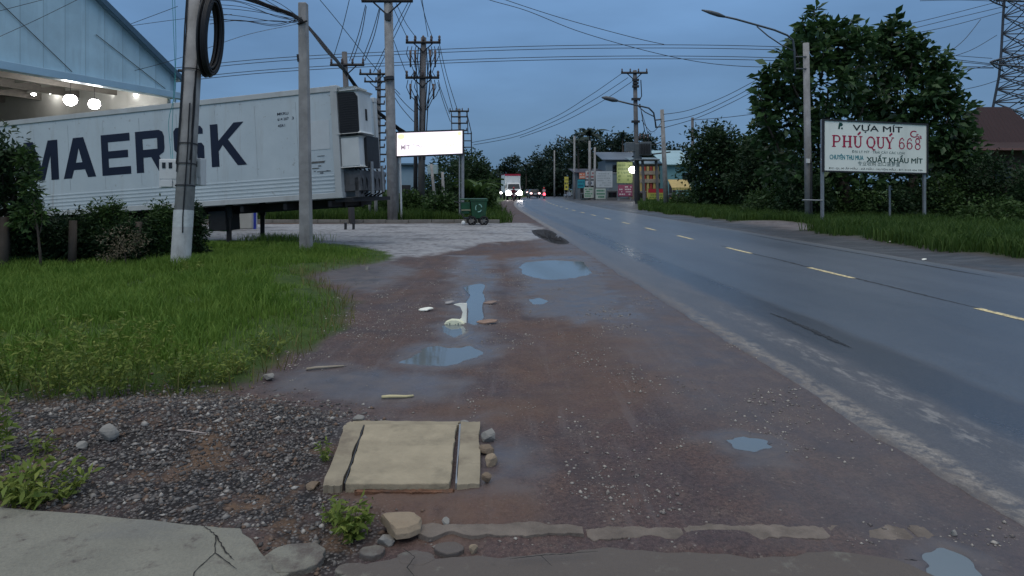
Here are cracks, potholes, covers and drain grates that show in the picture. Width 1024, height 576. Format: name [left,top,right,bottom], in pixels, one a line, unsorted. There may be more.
manhole cover [323,420,480,496]
crack [193,525,235,576]
